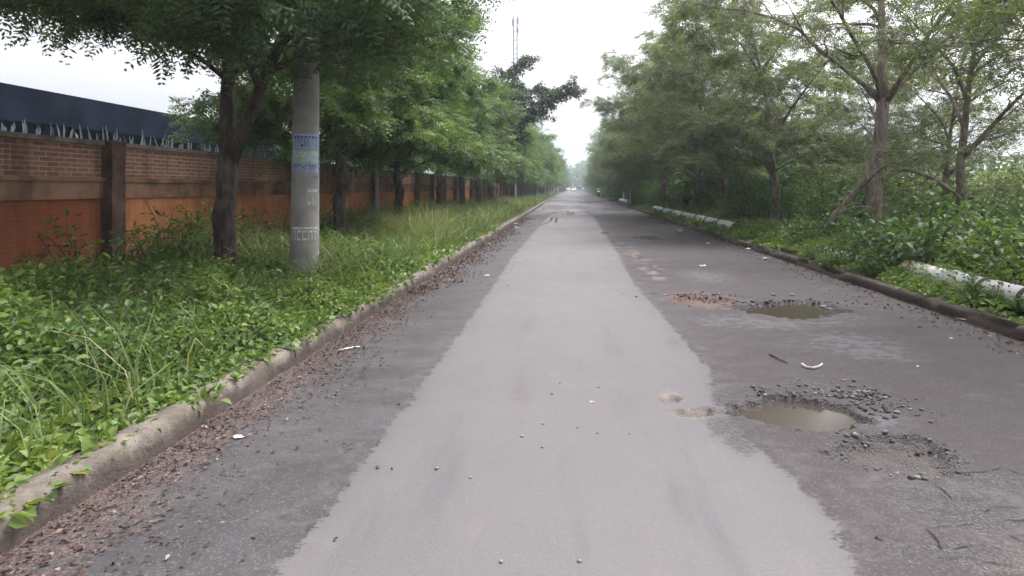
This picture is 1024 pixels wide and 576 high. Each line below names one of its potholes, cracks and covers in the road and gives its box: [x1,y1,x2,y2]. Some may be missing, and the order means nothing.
pothole [666,405,717,420]
pothole [720,376,952,442]
pothole [659,394,684,404]
pothole [817,430,972,480]
pothole [674,298,901,321]
crack [925,467,1024,567]
